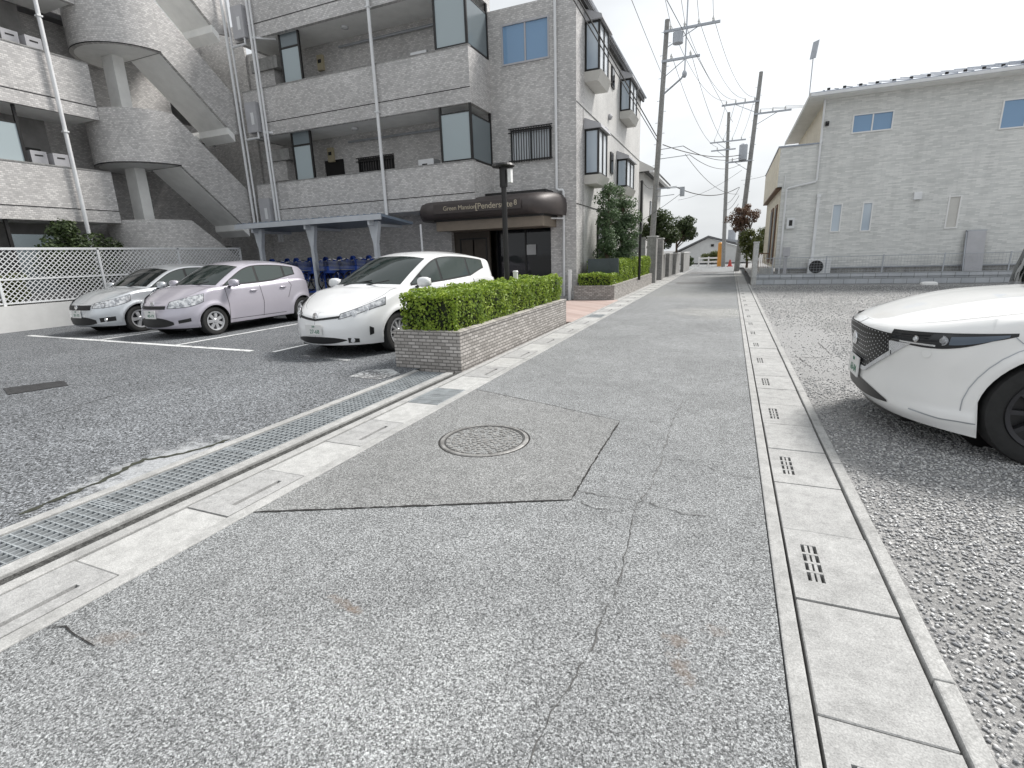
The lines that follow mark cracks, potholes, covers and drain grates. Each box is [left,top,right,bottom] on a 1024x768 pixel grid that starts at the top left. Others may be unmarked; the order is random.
drain grate [312,389,400,417]
manhole cover [438,425,530,457]
crack [18,439,230,515]
drain grate [376,371,444,392]
crack [46,625,96,647]
drain grate [0,501,129,567]
drain grate [225,414,343,454]
crack [528,400,754,768]
